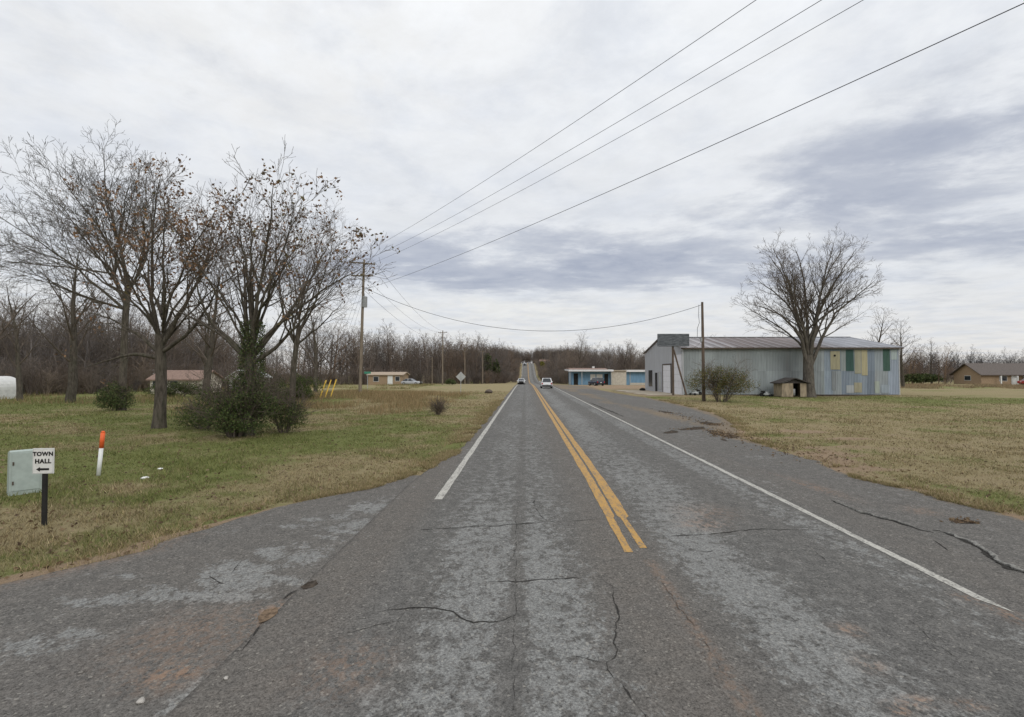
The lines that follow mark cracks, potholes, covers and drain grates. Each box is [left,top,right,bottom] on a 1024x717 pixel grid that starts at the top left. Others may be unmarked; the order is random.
crack [404,500,600,530]
crack [676,529,812,552]
crack [490,576,646,717]
crack [338,607,514,637]
crack [832,500,1024,573]
